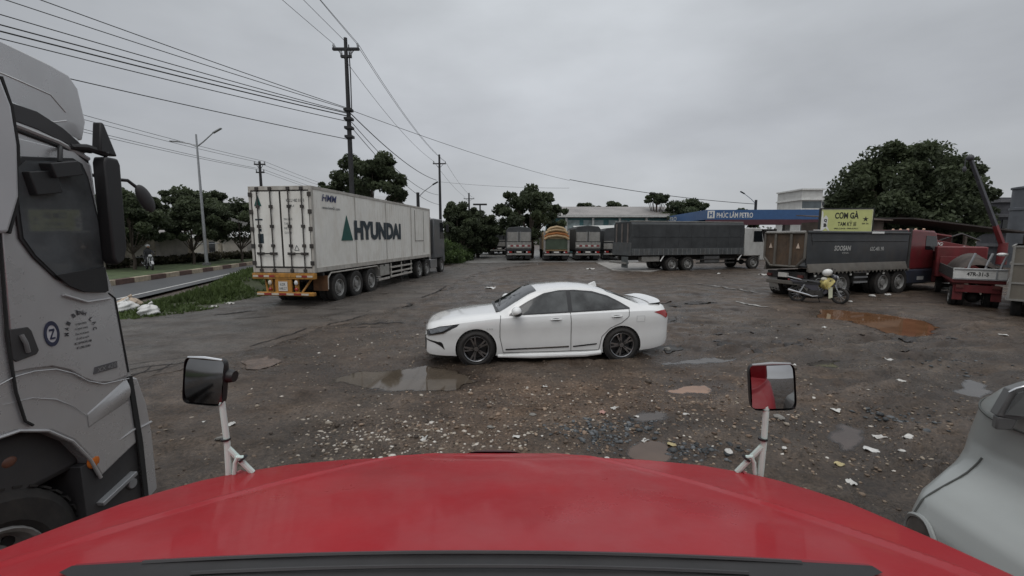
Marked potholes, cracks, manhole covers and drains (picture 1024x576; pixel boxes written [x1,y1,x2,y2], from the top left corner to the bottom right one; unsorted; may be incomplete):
crack [130,355,207,376]
